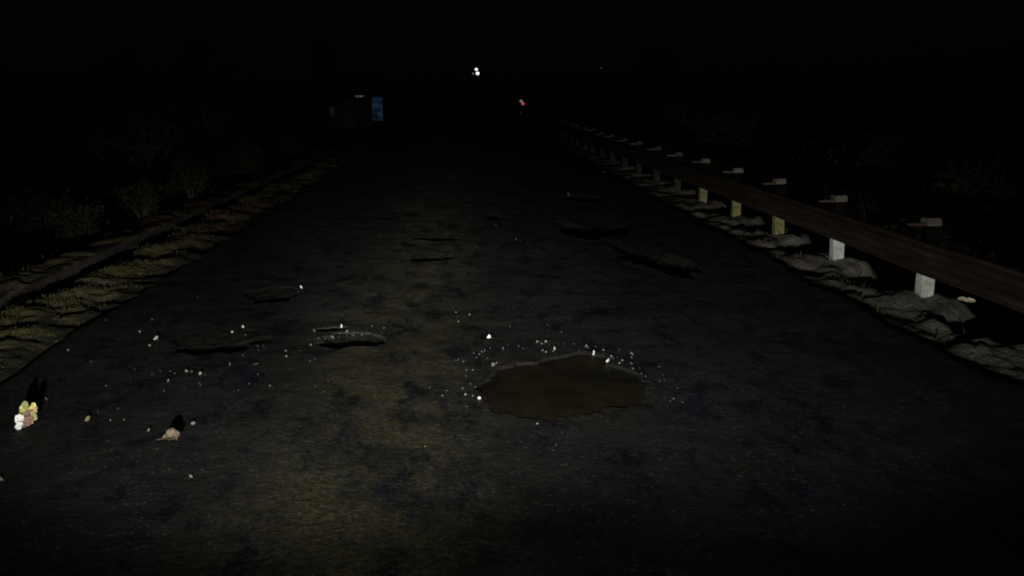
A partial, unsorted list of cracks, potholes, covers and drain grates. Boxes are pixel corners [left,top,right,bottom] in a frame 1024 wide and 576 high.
pothole [553,209,636,240]
pothole [169,328,274,355]
pothole [475,351,650,422]
pothole [312,331,387,349]
pothole [410,252,454,261]
pothole [600,238,703,279]
pothole [243,286,300,304]
